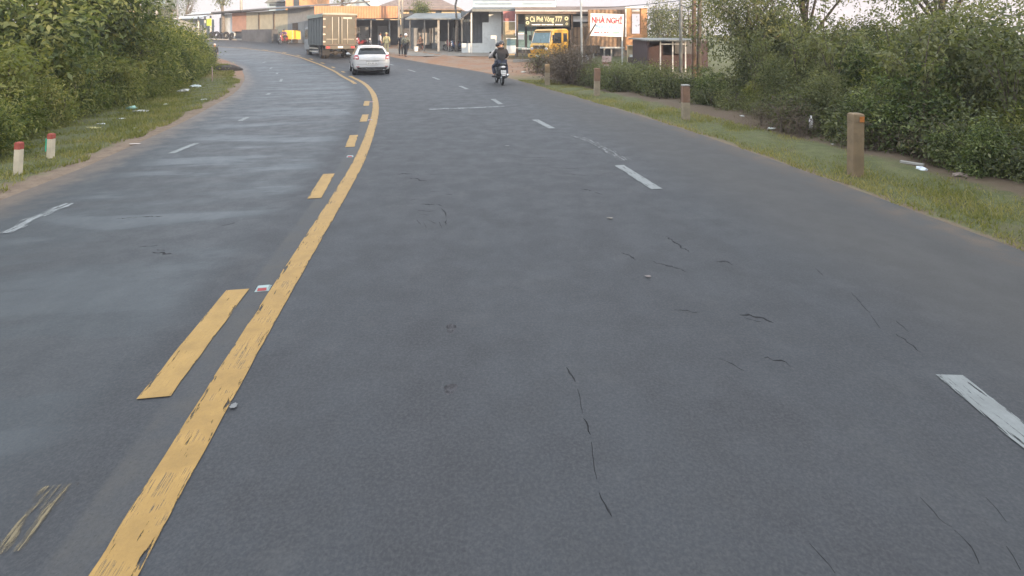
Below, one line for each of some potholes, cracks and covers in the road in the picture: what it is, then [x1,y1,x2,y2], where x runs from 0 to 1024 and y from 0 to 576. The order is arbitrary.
crack [675,309,774,323]
crack [566,367,612,517]
crack [851,292,920,352]
